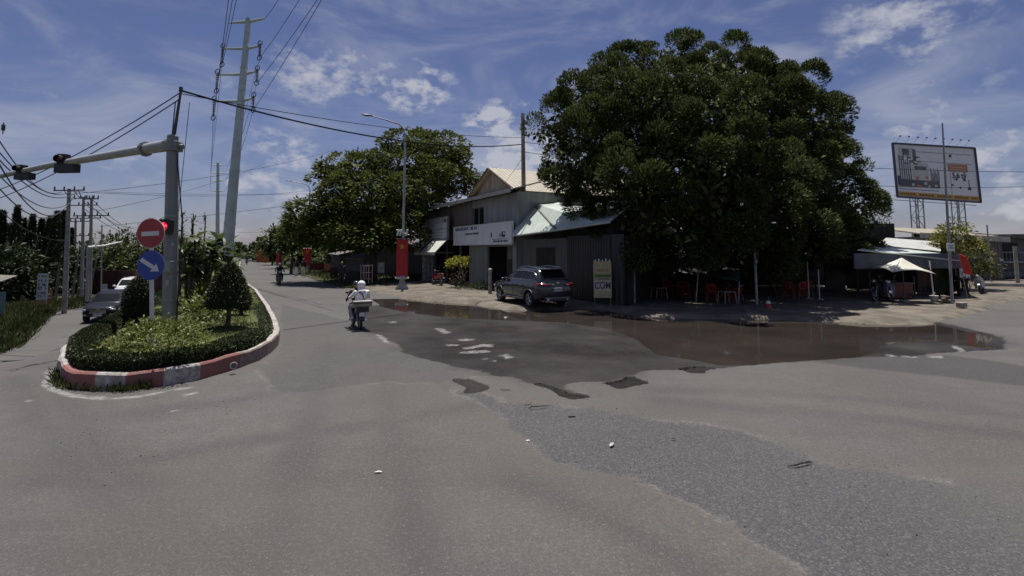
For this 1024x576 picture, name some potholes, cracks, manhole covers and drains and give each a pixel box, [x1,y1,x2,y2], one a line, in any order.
pothole [530,382,594,401]
pothole [449,378,493,395]
pothole [675,365,719,374]
pothole [598,375,651,390]
